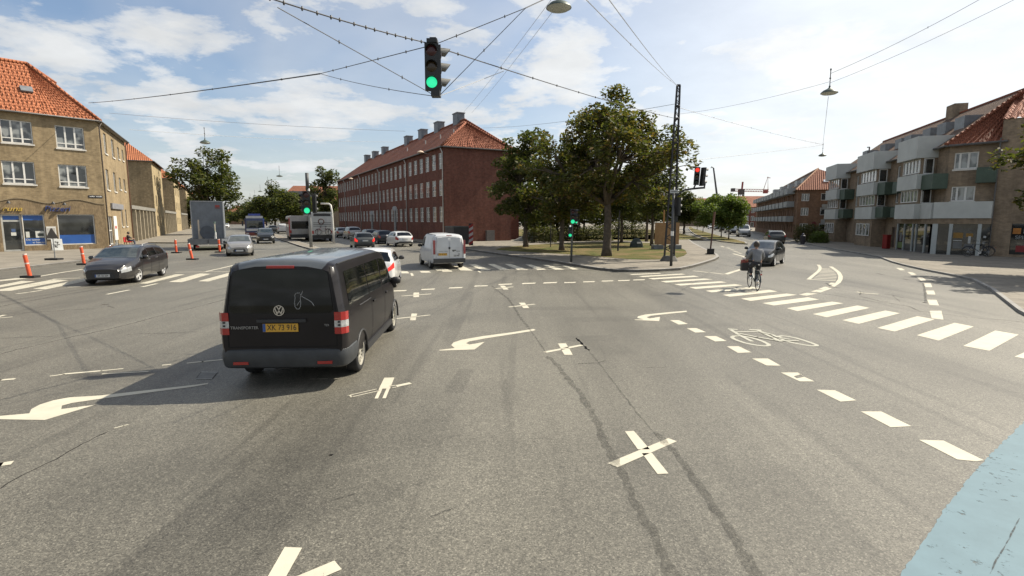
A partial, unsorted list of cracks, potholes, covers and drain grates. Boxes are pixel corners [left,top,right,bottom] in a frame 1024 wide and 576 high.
crack [992,518,1020,568]
crack [0,432,107,489]
